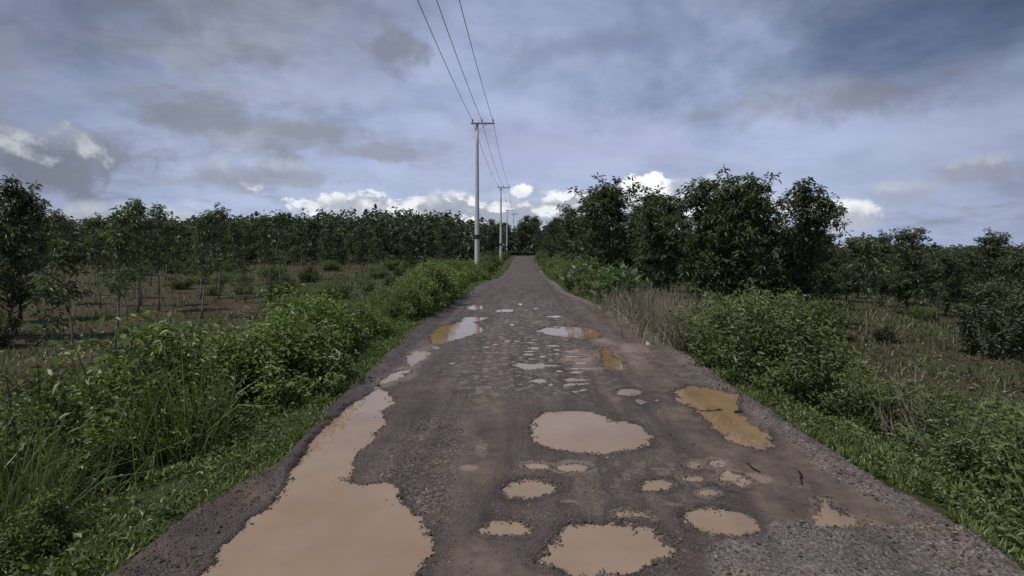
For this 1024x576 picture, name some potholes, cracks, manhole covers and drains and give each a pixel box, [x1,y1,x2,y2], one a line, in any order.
pothole [548,460,597,474]
pothole [532,325,607,340]
pothole [803,494,885,529]
pothole [424,316,491,345]
pothole [401,350,434,367]
pothole [470,515,540,540]
pothole [665,383,785,454]
pothole [375,369,416,385]
pothole [672,502,773,542]
pothole [517,460,553,472]
pothole [509,361,561,371]
pothole [596,346,628,371]
